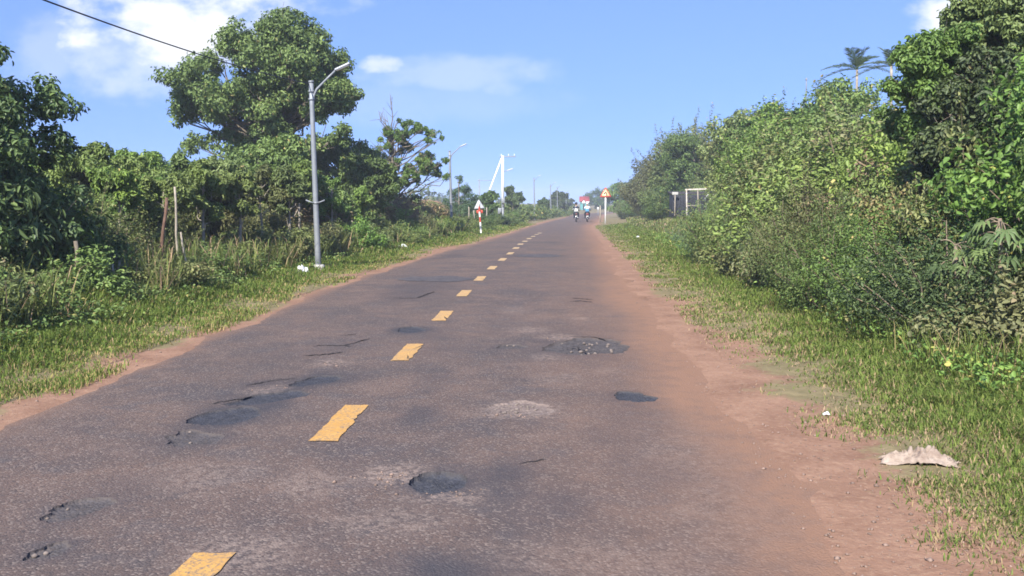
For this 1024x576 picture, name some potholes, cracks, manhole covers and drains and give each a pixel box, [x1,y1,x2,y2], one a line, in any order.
pothole [542,338,630,355]
pothole [409,471,468,493]
pothole [39,497,118,523]
pothole [165,429,225,447]
pothole [23,540,71,561]
pothole [186,406,261,425]
